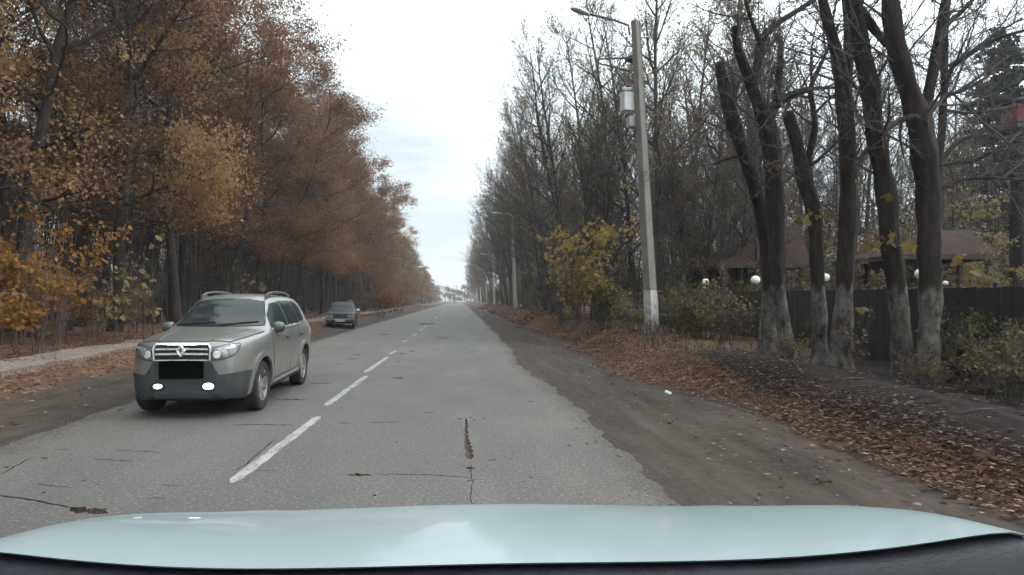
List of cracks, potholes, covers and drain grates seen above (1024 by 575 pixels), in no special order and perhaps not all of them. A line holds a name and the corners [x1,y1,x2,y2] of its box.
crack [234,424,275,471]
crack [380,465,476,503]
crack [0,480,98,509]
